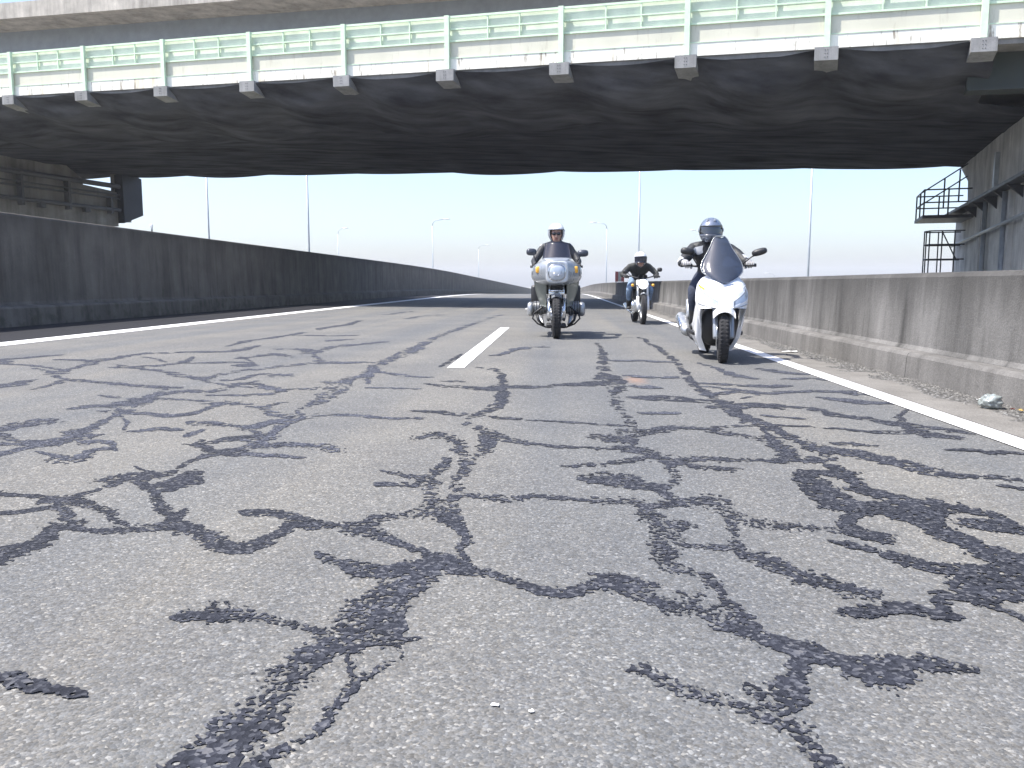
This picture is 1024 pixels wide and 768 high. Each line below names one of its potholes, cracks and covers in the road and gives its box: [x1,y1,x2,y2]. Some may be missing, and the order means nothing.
crack [0,311,1024,768]
